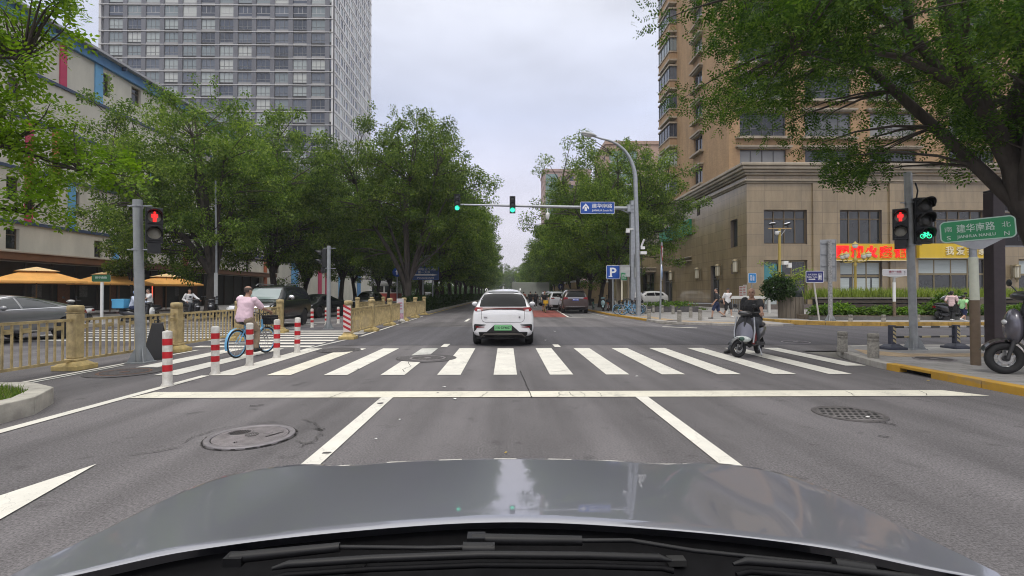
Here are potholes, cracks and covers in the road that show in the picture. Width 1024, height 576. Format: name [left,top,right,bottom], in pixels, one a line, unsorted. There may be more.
manhole cover [81,367,162,378]
manhole cover [200,424,298,451]
manhole cover [811,406,890,423]
manhole cover [398,354,457,362]
